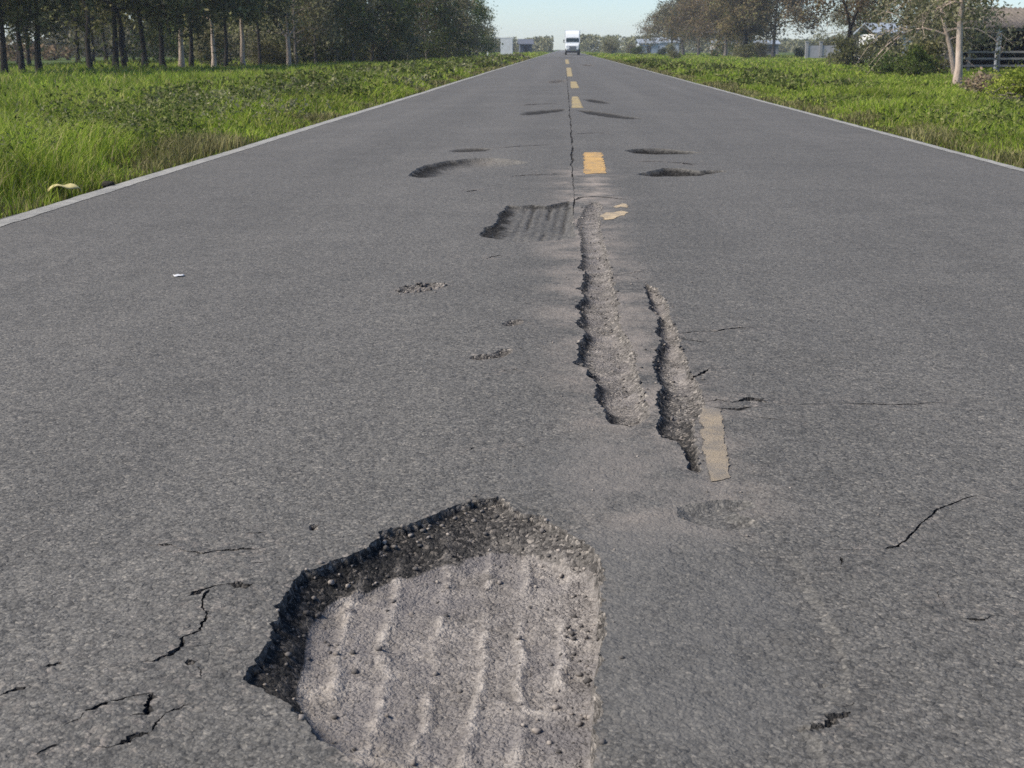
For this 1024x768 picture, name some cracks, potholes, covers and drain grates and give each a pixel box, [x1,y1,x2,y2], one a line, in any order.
crack [143,581,253,676]
pothole [242,497,607,768]
pothole [636,168,726,177]
crack [35,744,58,755]
pothole [644,282,705,474]
pothole [395,283,446,293]
pothole [479,201,577,242]
crack [704,397,944,420]
pothole [576,110,645,120]
crack [834,488,1022,569]
pothole [469,348,513,360]
